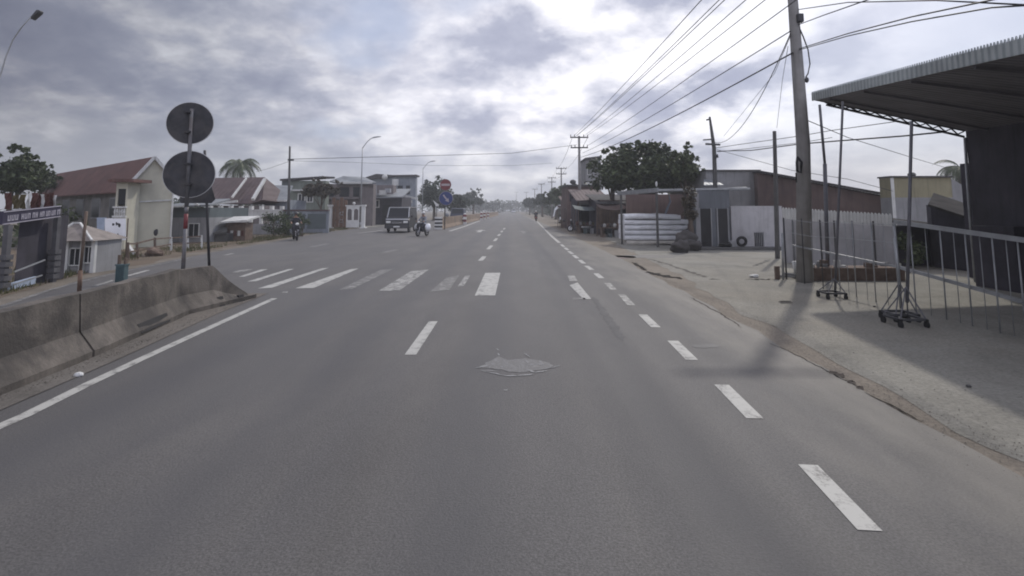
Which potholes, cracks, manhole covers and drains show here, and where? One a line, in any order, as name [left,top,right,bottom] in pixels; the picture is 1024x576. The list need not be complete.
crack [651,259,706,277]
